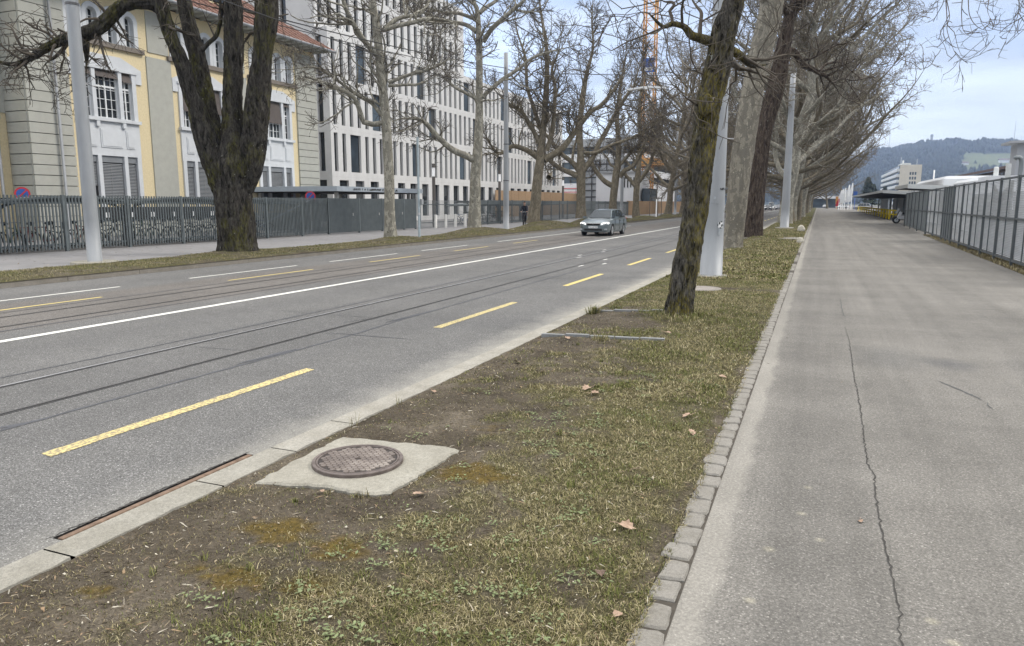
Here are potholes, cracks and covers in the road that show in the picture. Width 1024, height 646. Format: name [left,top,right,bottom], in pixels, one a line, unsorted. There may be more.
manhole cover [254,437,459,497]
crack [840,299,904,646]
